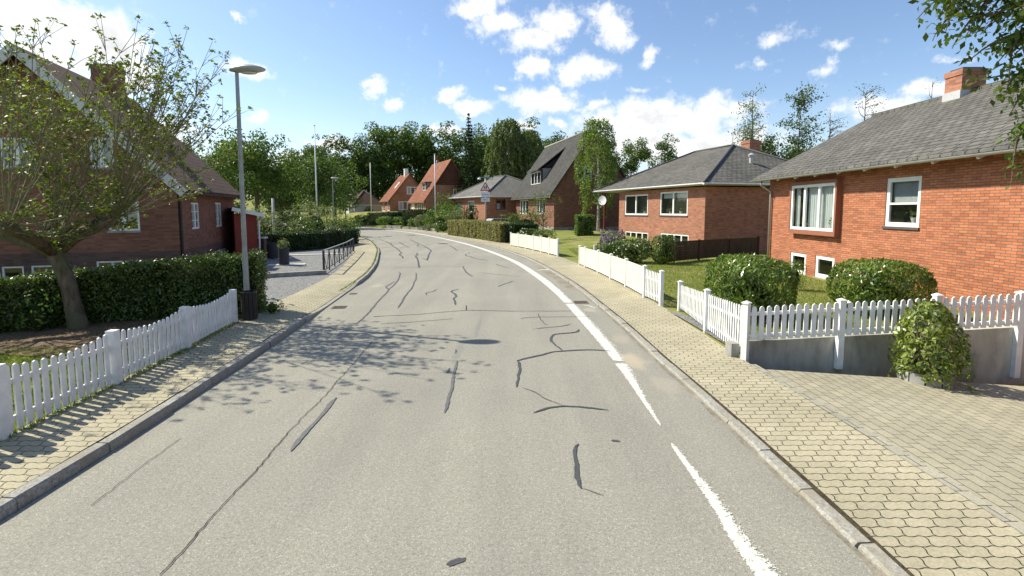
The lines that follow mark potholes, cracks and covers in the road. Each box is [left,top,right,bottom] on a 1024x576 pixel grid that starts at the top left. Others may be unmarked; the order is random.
crack [374,306,495,324]
crack [159,345,369,575]
